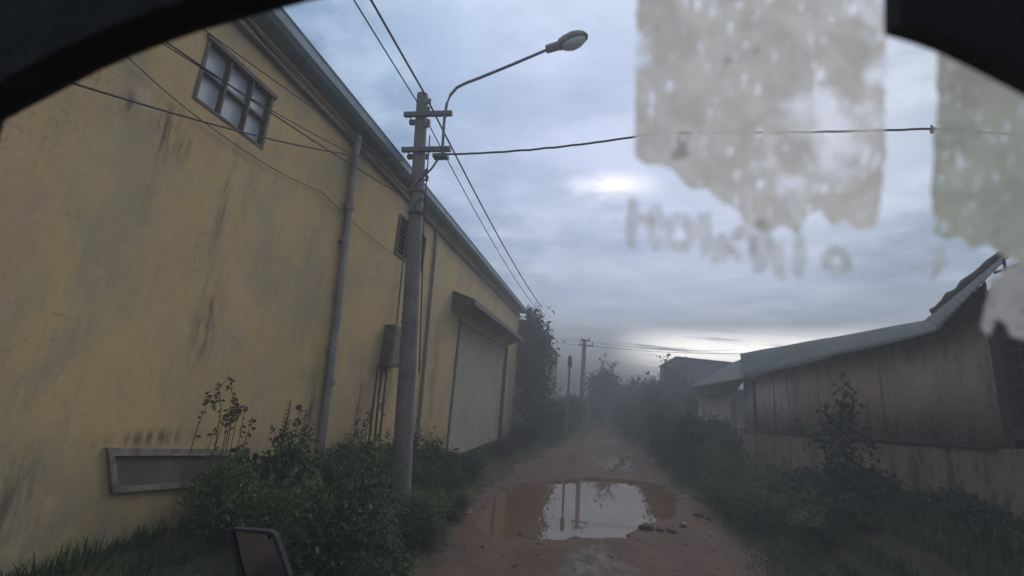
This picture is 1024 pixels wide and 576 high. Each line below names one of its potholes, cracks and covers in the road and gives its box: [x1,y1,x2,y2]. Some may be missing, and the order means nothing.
pothole [605,455,632,472]
pothole [465,476,689,542]
